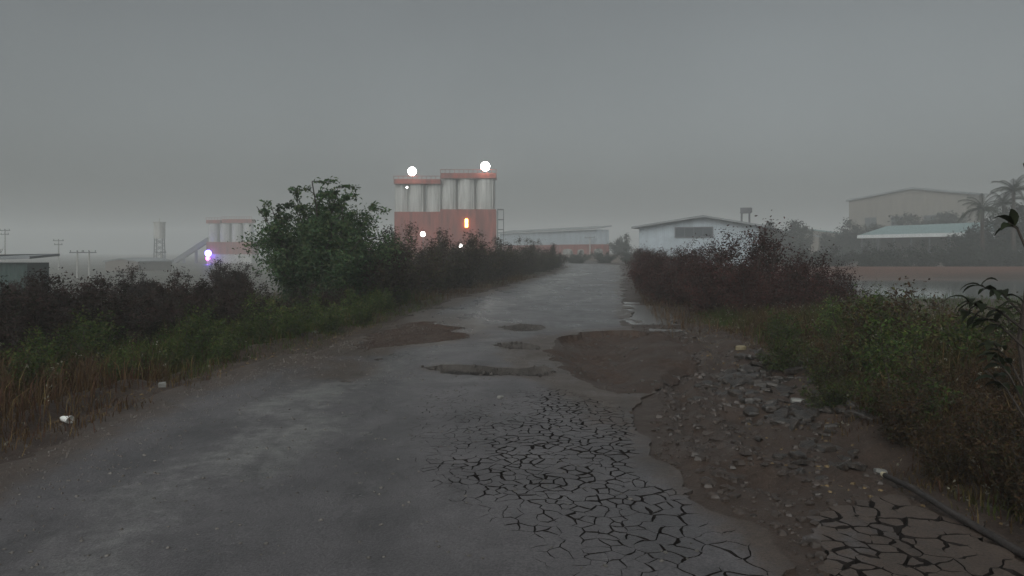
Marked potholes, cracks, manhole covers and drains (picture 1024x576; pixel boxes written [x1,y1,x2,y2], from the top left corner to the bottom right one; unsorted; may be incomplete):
pothole [494,341,541,350]
crack [403,381,770,576]
pothole [542,330,710,394]
crack [817,498,1024,576]
pothole [421,364,556,377]
pothole [351,321,470,352]
